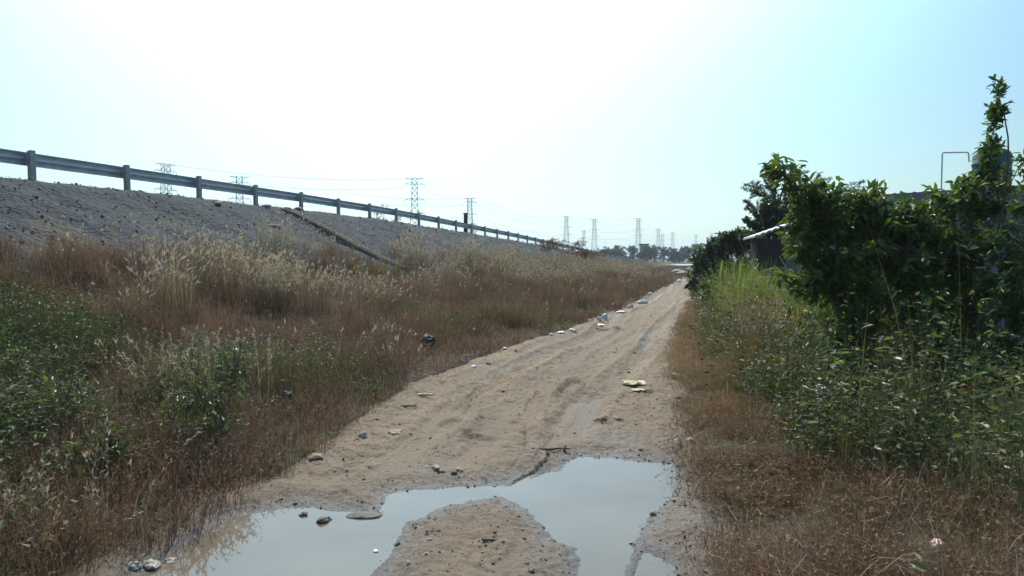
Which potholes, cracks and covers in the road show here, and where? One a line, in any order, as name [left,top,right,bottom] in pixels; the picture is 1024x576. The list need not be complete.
pothole [483,452,689,576]
pothole [133,482,501,576]
